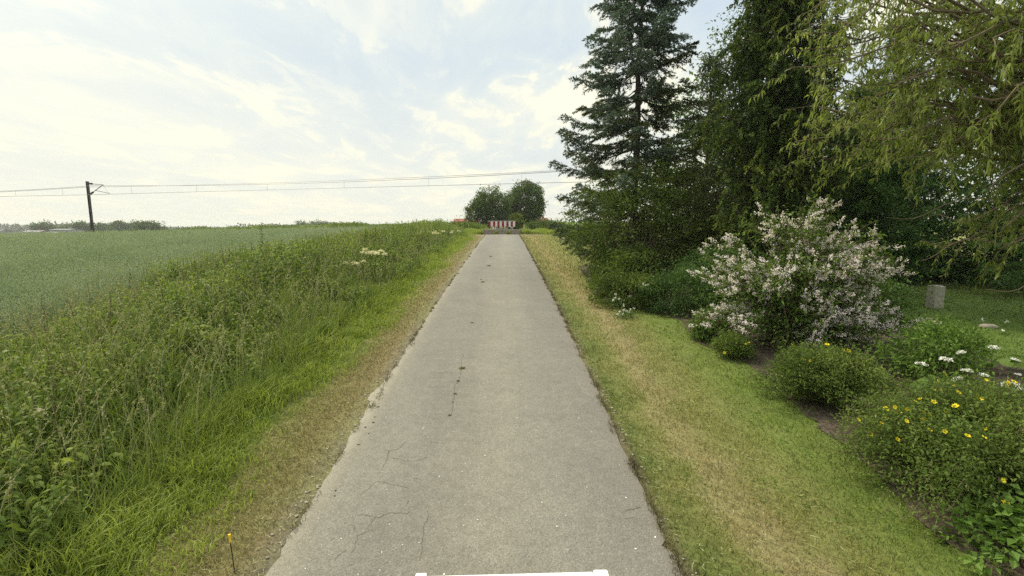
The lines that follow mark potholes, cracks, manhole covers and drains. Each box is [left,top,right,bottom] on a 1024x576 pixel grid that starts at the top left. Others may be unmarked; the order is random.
crack [330,442,444,560]
